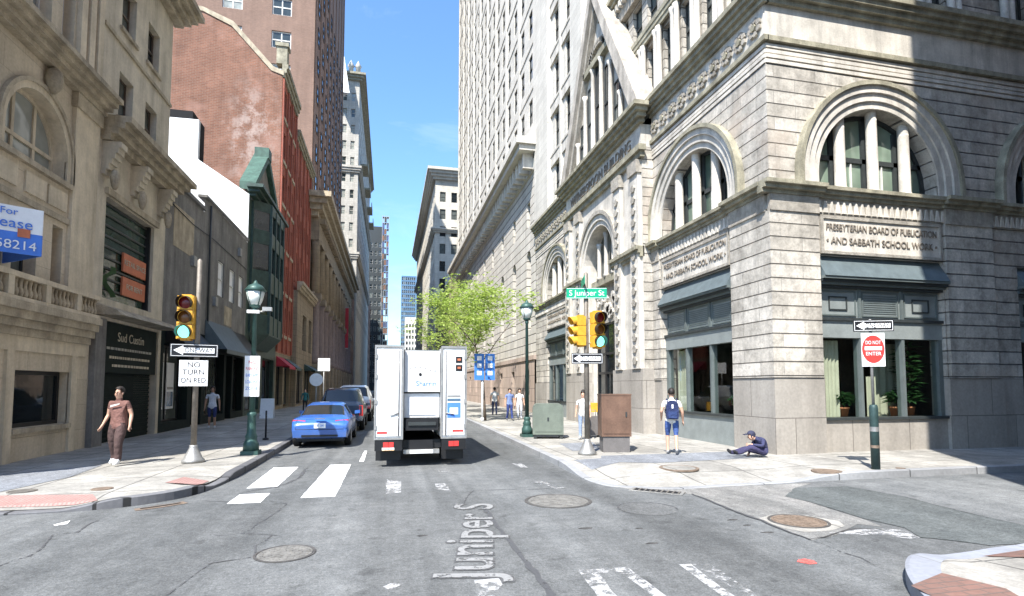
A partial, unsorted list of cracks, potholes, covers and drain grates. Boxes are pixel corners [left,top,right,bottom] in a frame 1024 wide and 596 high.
drain grate [628,487,686,496]
manhole cover [767,514,831,528]
manhole cover [525,494,592,508]
crack [0,520,98,566]
drain grate [134,501,187,511]
manhole cover [253,544,316,563]
